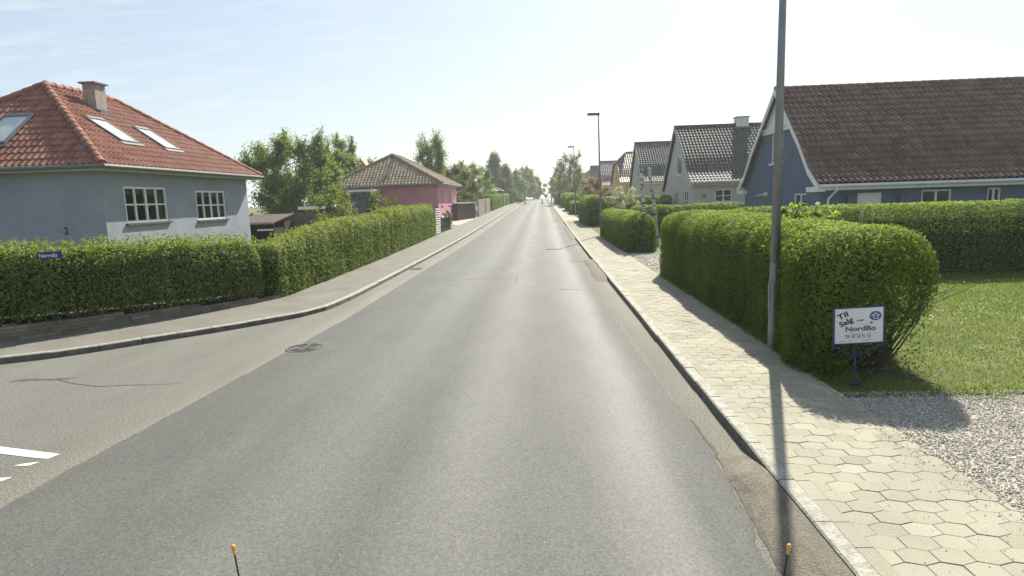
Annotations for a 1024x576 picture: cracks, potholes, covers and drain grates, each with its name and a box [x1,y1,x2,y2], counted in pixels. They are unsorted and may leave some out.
manhole cover [286,343,324,353]
